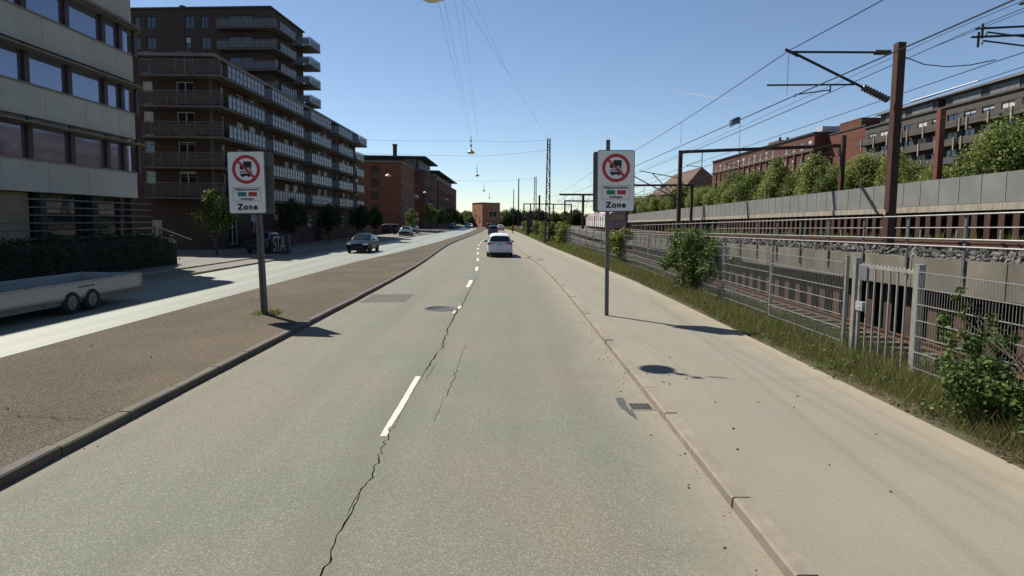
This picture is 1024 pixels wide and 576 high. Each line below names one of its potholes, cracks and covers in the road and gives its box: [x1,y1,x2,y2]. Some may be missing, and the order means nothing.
crack [320,280,475,576]
